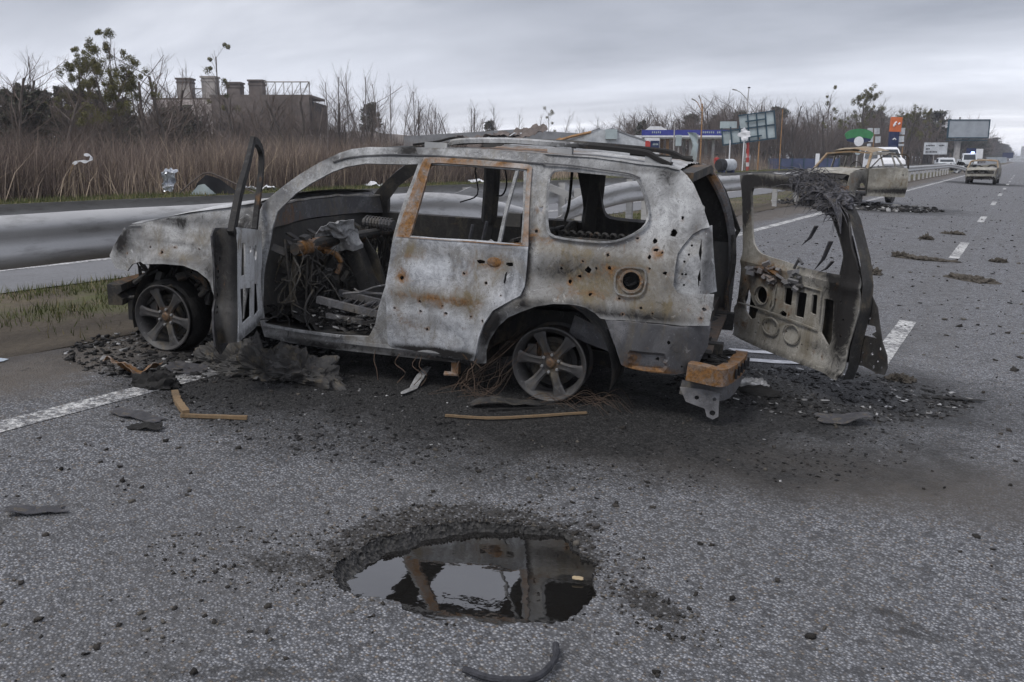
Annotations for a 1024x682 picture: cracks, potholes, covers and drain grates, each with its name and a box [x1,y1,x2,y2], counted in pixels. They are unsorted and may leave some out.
pothole [333,521,598,623]
